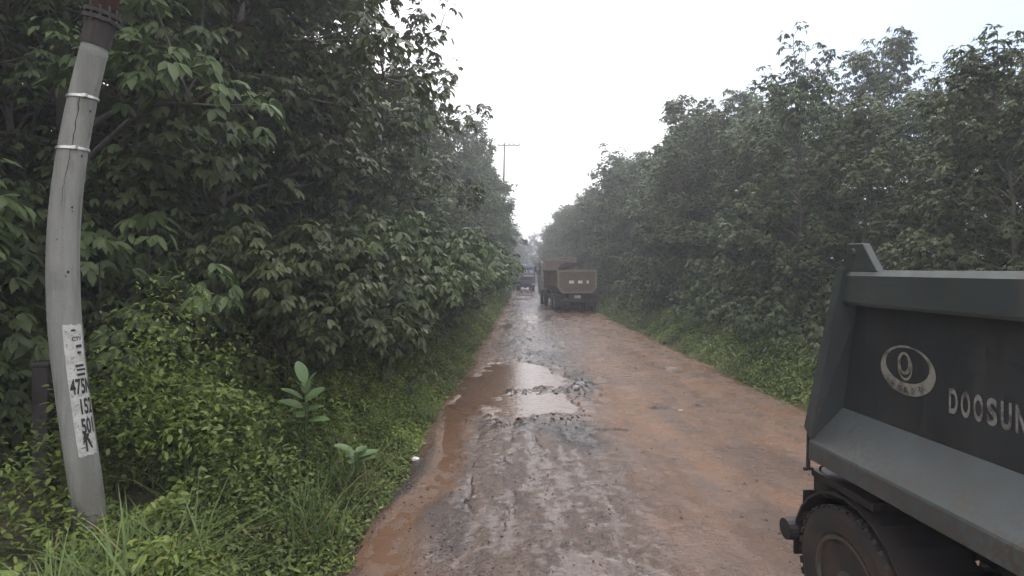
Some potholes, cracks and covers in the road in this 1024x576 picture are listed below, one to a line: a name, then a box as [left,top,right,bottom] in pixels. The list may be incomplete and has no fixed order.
pothole [547,419,613,454]
pothole [437,359,617,431]
crack [461,430,561,532]
